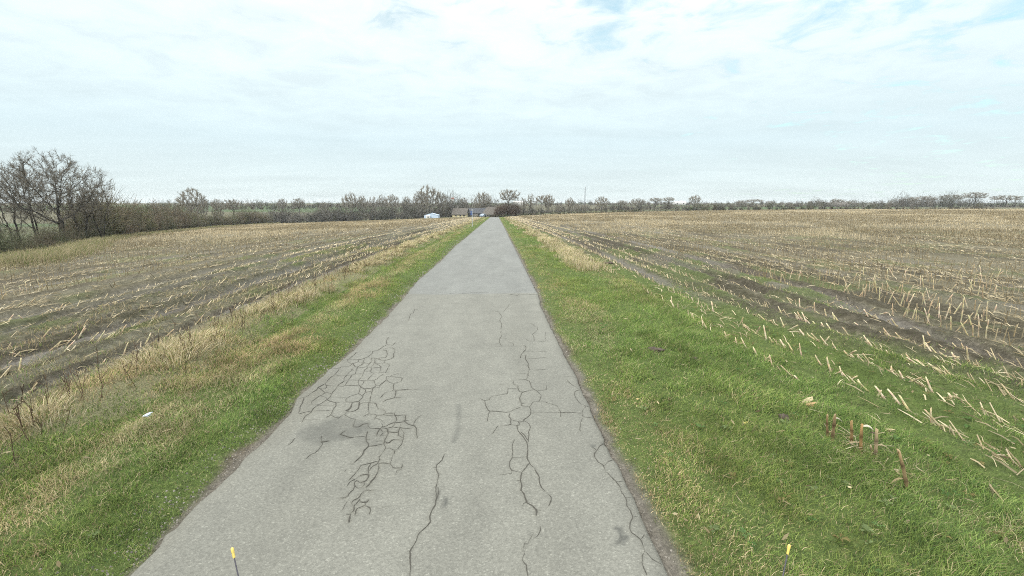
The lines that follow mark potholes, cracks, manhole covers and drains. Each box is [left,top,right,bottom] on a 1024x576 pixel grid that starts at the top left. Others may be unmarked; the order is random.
crack [593,444,661,574]
crack [482,310,576,575]
crack [409,456,444,571]
crack [299,340,419,522]
